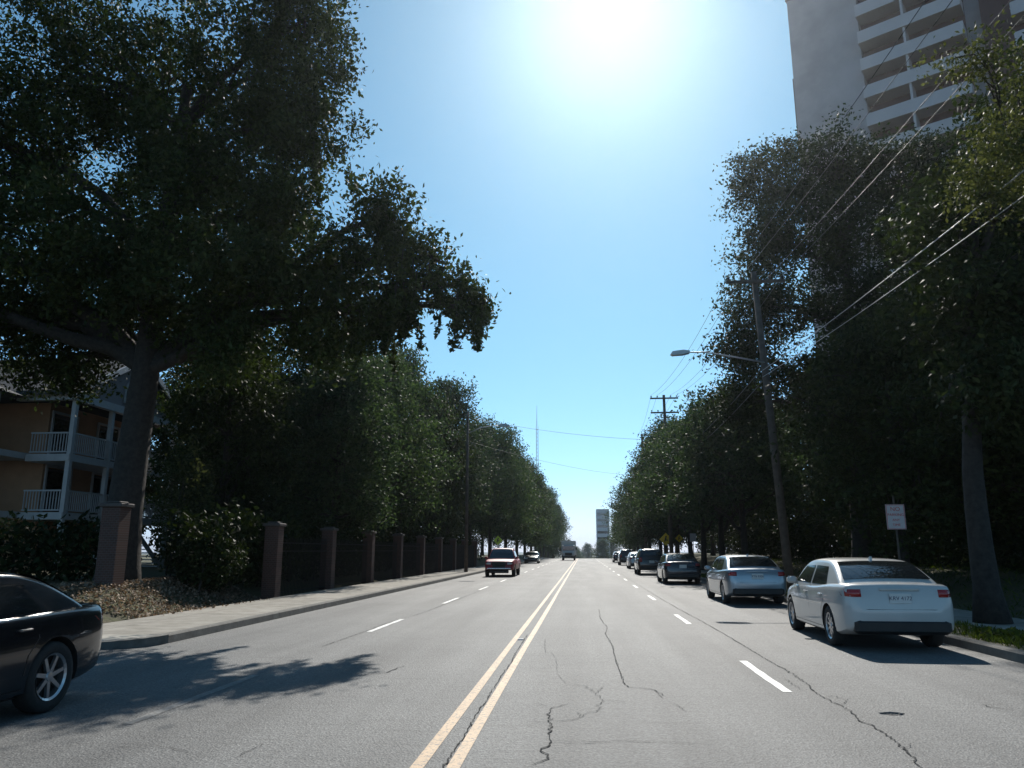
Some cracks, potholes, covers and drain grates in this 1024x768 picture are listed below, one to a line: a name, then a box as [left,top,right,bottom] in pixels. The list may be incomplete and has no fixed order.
crack [625,576,923,768]
crack [599,612,685,710]
crack [442,635,527,768]
crack [530,683,702,766]
